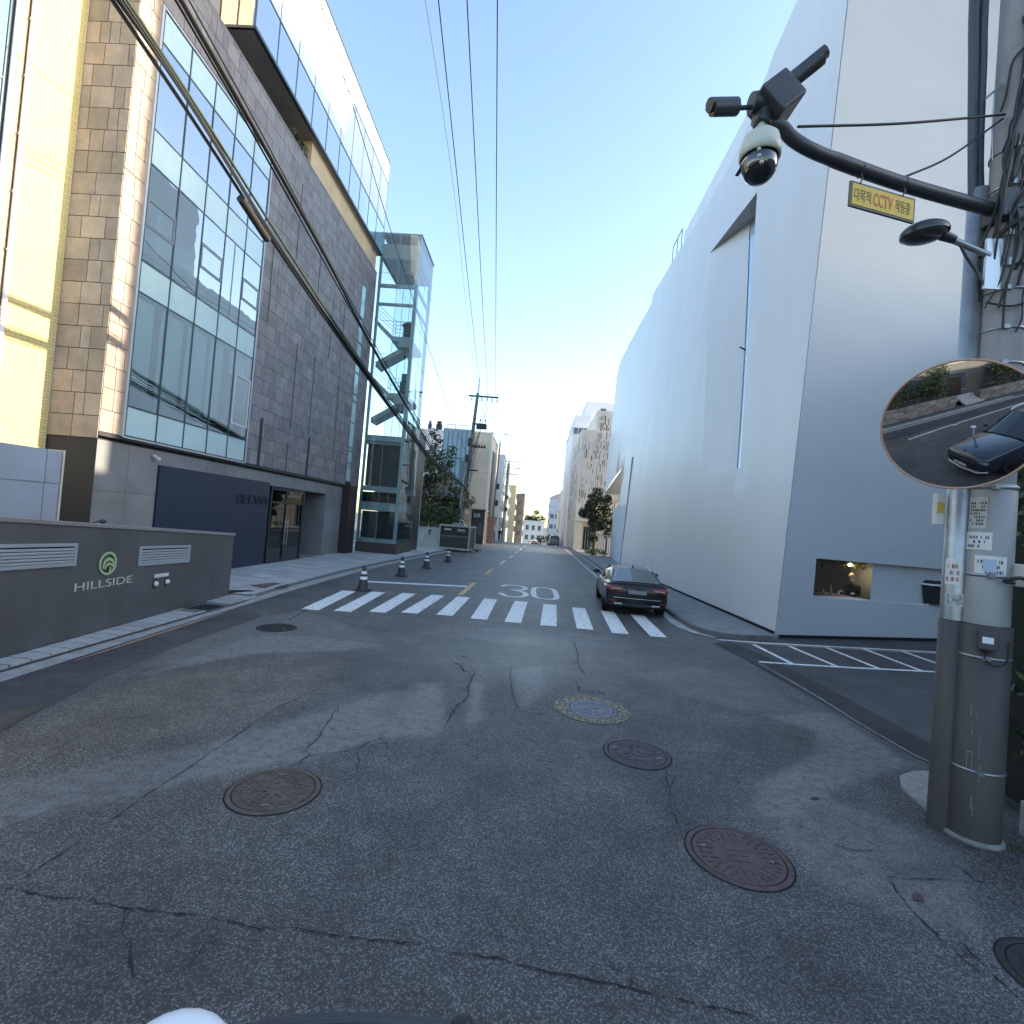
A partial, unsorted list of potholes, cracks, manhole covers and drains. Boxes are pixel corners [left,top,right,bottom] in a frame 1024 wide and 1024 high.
manhole cover [603,739,672,770]
crack [661,770,699,829]
crack [280,705,388,772]
crack [446,656,475,725]
manhole cover [223,768,322,816]
manhole cover [554,696,630,724]
manhole cover [993,937,1024,987]
manhole cover [256,623,297,632]
crack [506,643,604,714]
crack [887,876,1021,1000]
manhole cover [684,825,797,893]
crack [1,888,765,1021]
